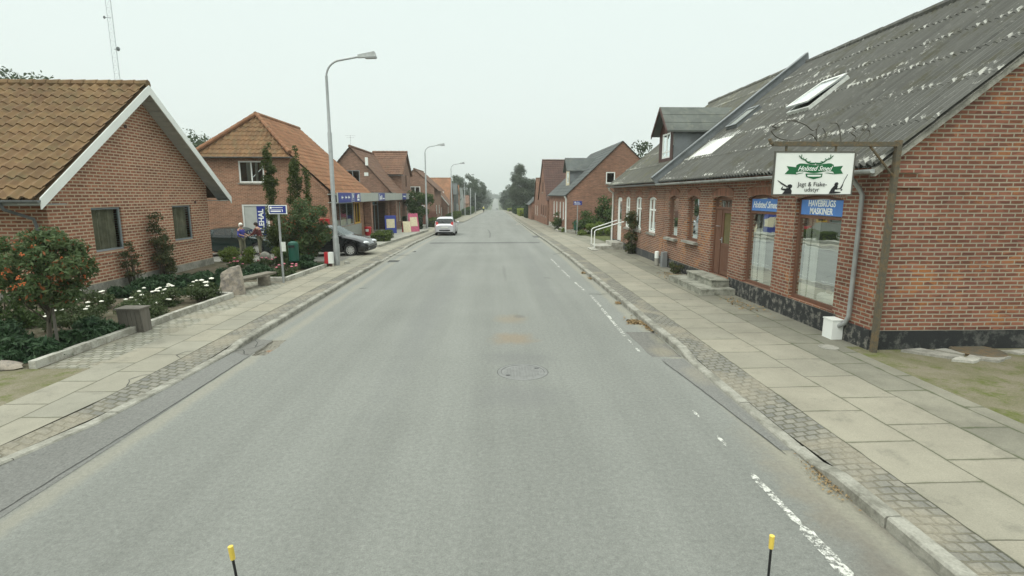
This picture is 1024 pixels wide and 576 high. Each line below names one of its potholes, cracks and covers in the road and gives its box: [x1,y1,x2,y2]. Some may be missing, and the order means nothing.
manhole cover [497,364,548,380]
